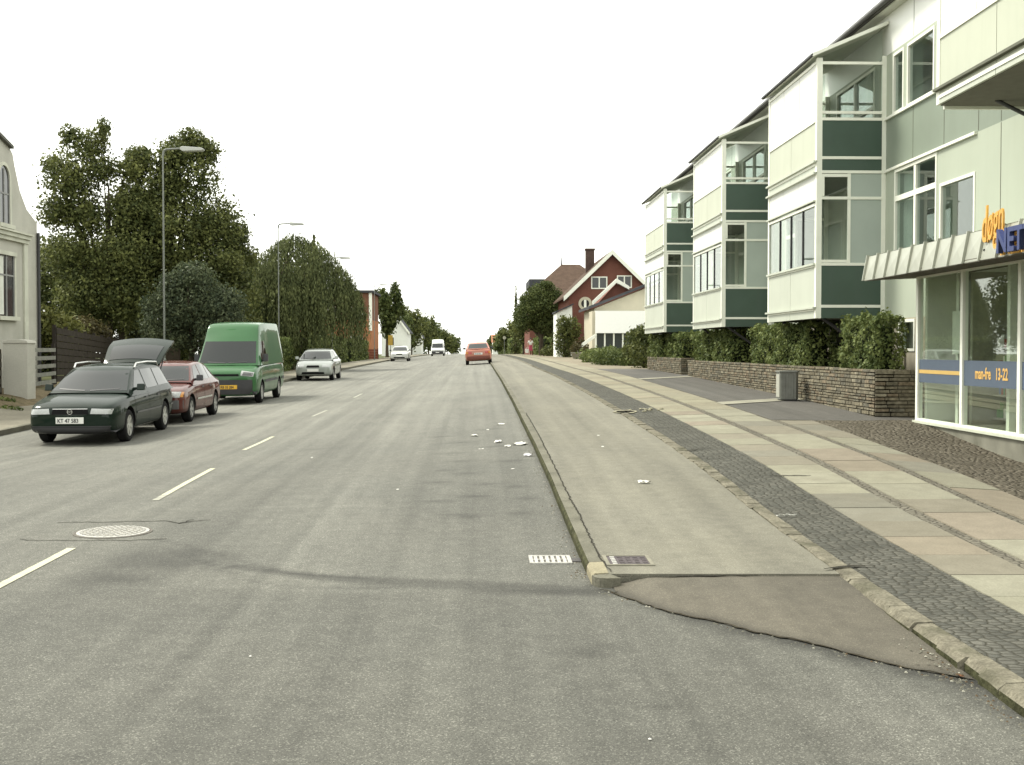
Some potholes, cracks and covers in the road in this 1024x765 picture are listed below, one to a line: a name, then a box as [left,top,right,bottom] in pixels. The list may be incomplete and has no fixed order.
manhole cover [72,525,153,539]
drain grate [528,555,581,564]
